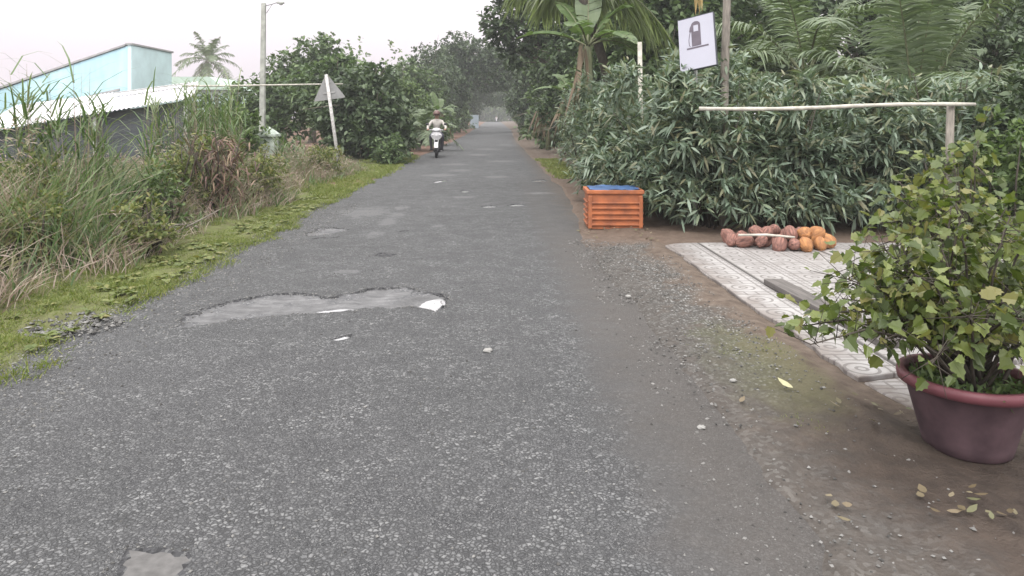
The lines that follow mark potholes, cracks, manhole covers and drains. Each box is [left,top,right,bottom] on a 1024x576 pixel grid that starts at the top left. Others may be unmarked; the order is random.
pothole [177,286,449,328]
pothole [117,547,193,576]
pothole [305,227,351,236]
